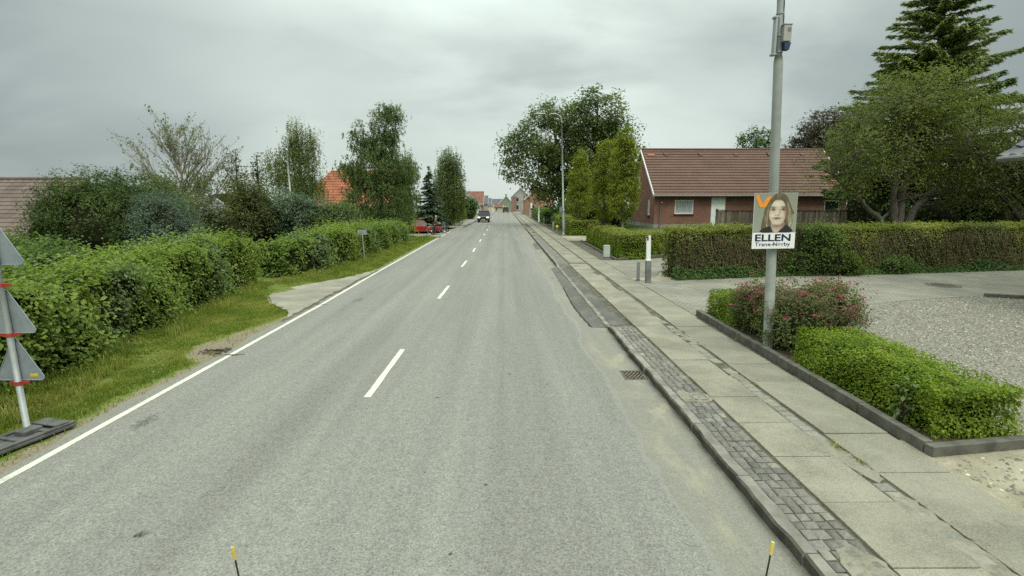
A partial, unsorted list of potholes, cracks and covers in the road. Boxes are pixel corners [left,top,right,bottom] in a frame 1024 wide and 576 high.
drain grate [619,370,648,380]
pothole [197,347,232,355]
